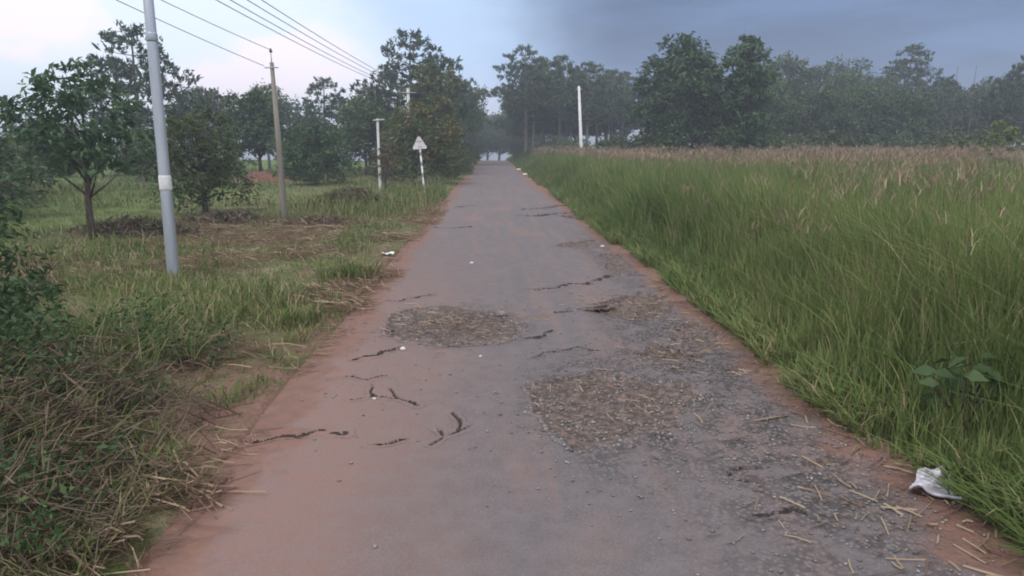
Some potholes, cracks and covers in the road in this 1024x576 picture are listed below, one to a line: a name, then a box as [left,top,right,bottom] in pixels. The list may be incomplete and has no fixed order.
crack [517,274,617,359]
crack [521,204,585,222]
crack [240,345,481,449]
crack [381,294,439,302]
